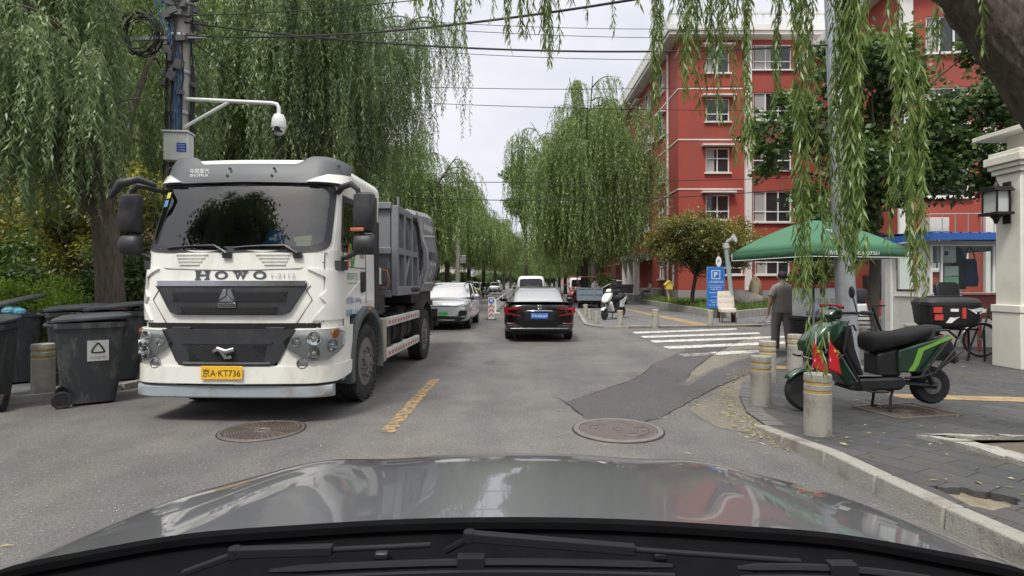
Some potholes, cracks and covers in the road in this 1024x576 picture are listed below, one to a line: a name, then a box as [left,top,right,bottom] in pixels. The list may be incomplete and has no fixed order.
pothole [949,493,1012,511]
manhole cover [572,418,665,444]
manhole cover [215,419,307,442]
